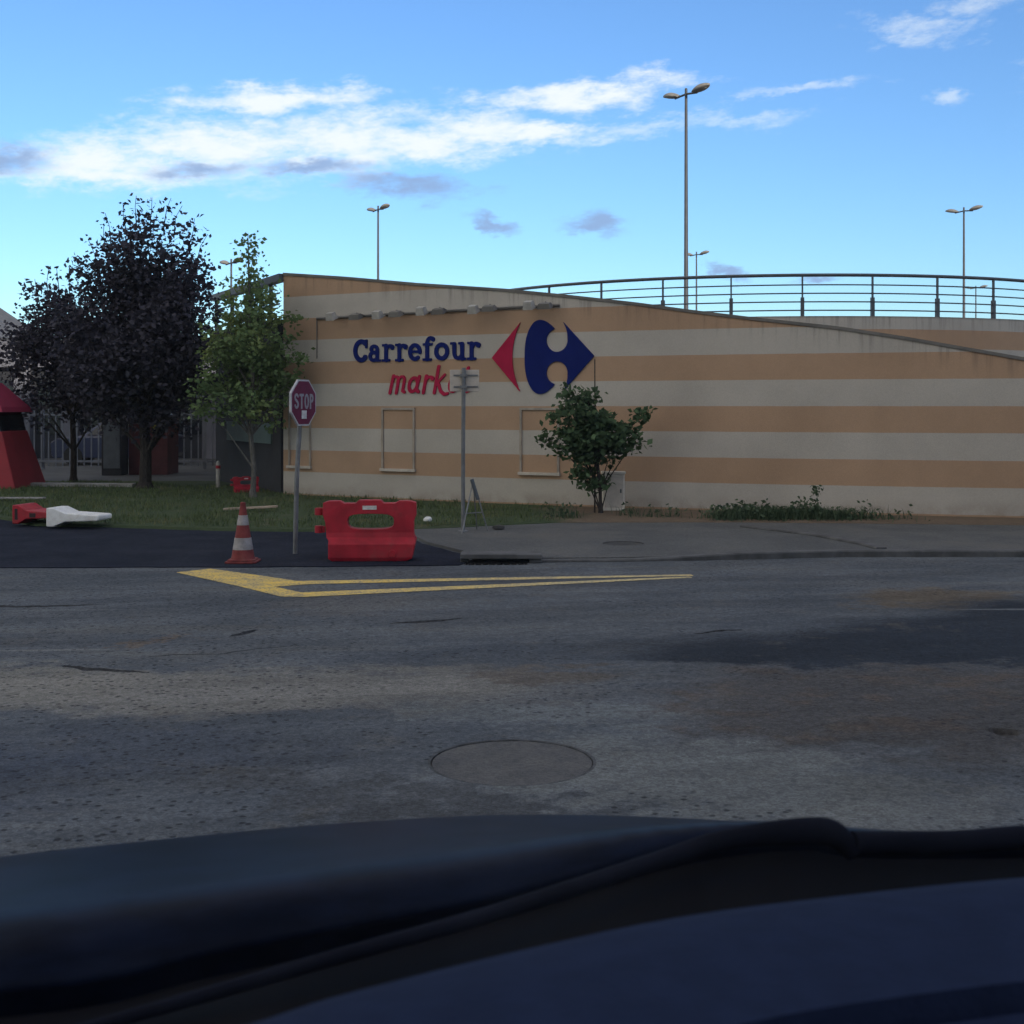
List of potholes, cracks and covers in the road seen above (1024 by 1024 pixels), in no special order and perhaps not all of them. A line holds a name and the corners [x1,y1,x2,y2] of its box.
drain grate [460,551,542,565]
crack [62,630,299,673]
pothole [984,728,1021,737]
manhole cover [428,739,596,786]
